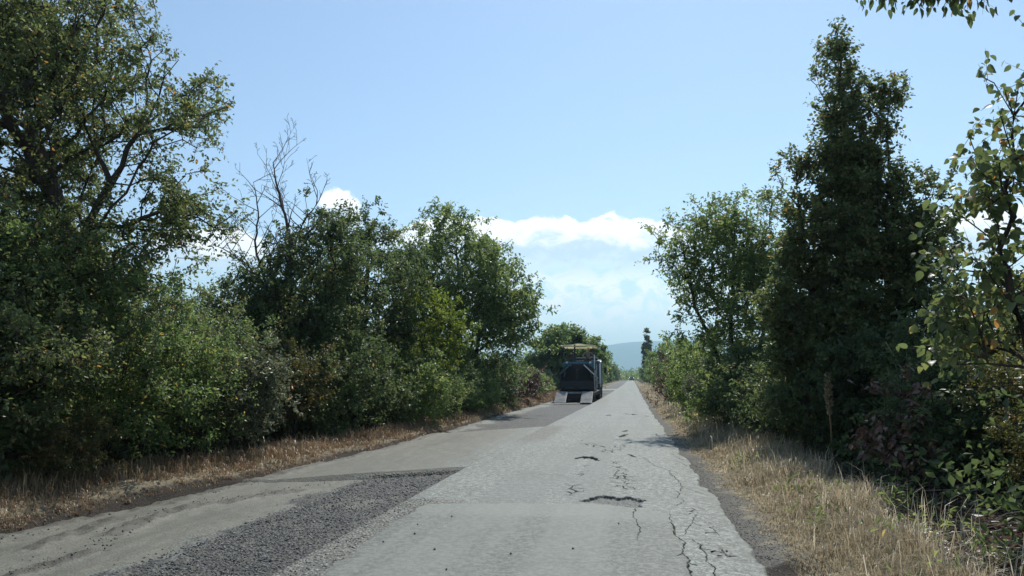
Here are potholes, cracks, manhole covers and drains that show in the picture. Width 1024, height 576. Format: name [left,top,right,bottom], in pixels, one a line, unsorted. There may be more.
crack [509,439,757,576]
pothole [568,493,656,509]
